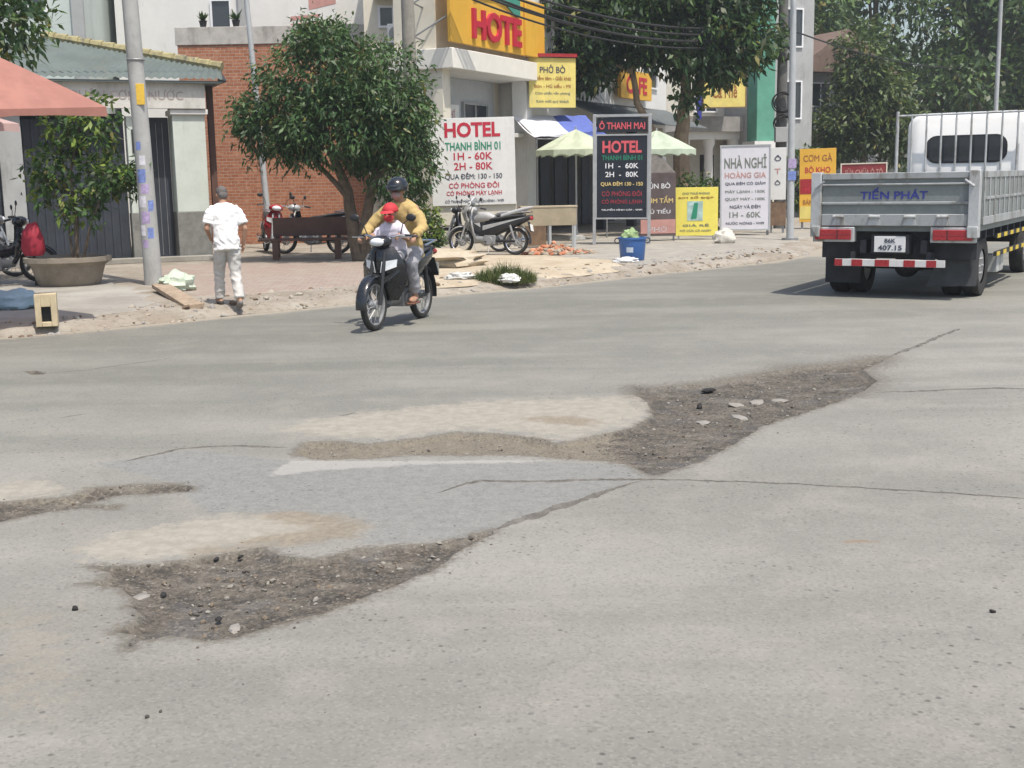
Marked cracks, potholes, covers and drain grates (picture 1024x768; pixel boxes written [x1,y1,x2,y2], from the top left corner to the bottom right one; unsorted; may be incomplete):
pothole [292,356,890,476]
crack [124,445,279,462]
pothole [84,529,494,651]
pothole [0,484,195,522]
crack [435,478,1024,499]
crack [894,329,960,355]
